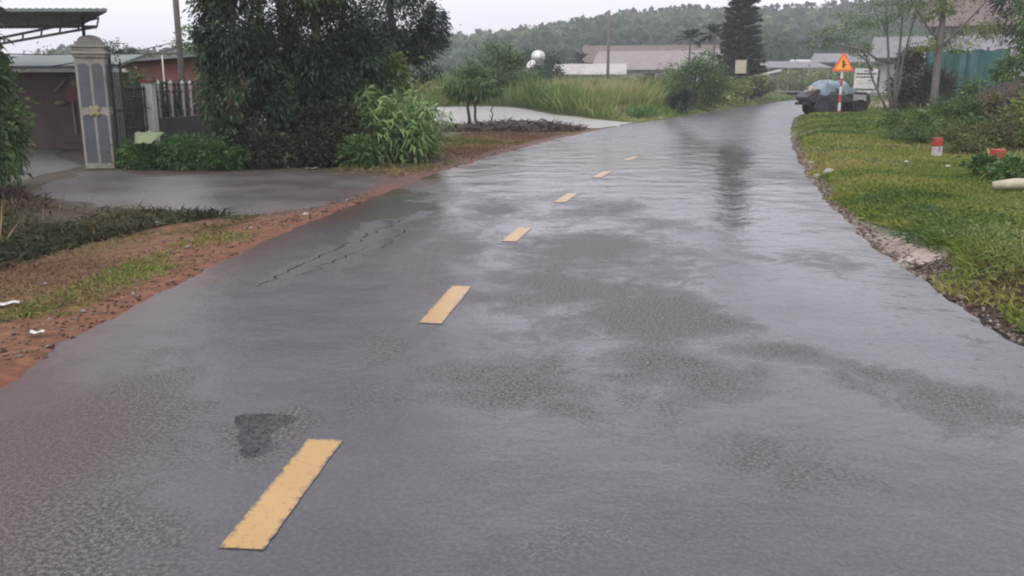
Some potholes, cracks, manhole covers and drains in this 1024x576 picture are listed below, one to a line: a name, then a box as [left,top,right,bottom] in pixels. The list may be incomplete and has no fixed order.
crack [257,214,414,287]
